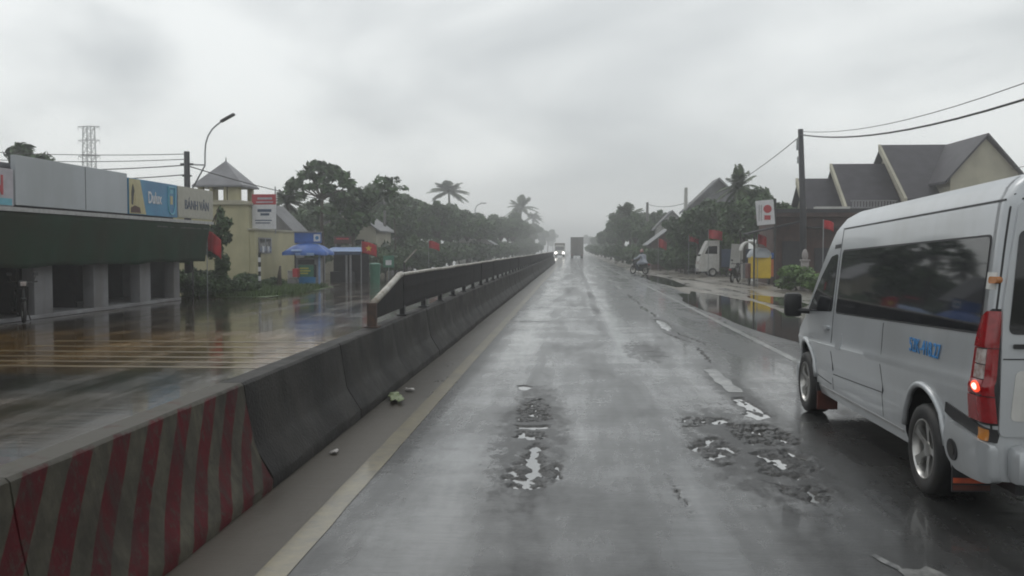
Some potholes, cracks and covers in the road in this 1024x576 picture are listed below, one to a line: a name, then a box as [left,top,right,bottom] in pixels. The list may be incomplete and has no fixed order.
pothole [680,435,746,467]
crack [622,299,711,363]
pothole [498,441,569,492]
pothole [747,447,828,481]
pothole [731,397,774,420]
crack [662,473,698,515]
